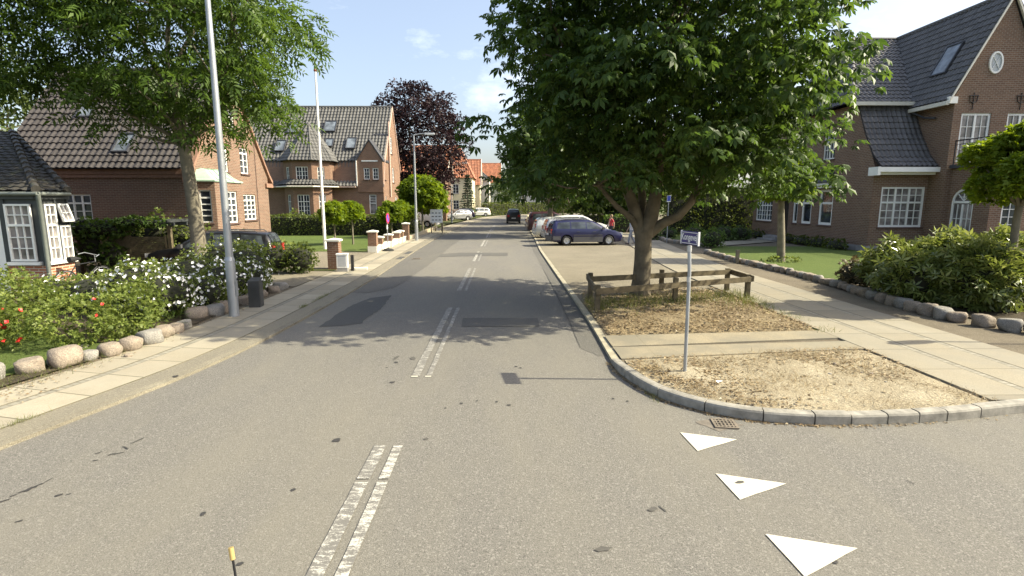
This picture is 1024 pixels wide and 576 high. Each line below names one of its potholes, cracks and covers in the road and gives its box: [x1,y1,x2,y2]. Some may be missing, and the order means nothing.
crack [0,478,71,502]
